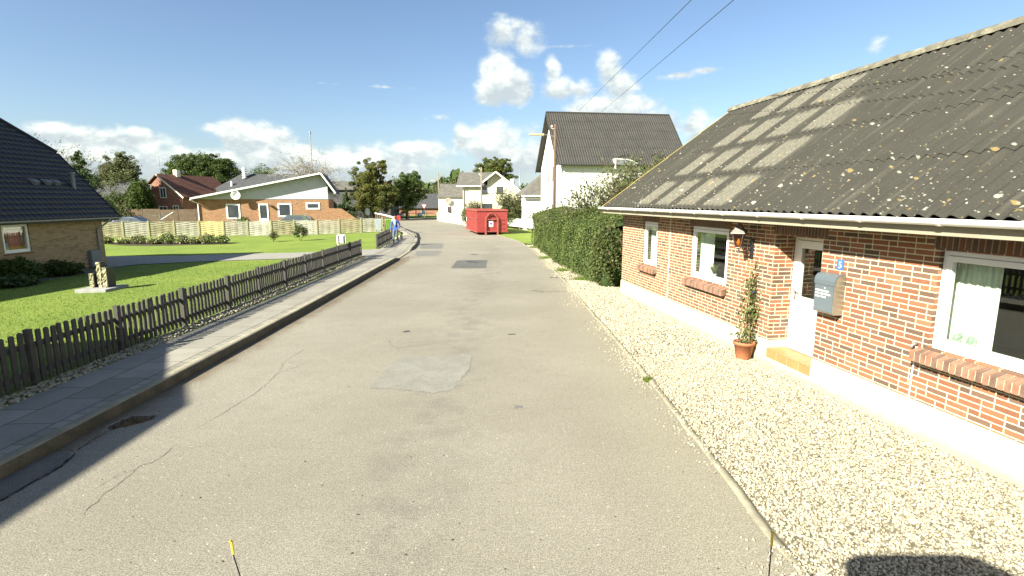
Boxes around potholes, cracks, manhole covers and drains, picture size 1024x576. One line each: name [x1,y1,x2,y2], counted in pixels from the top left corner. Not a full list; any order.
crack [0,432,107,501]
crack [83,448,171,517]
pothole [102,414,160,431]
